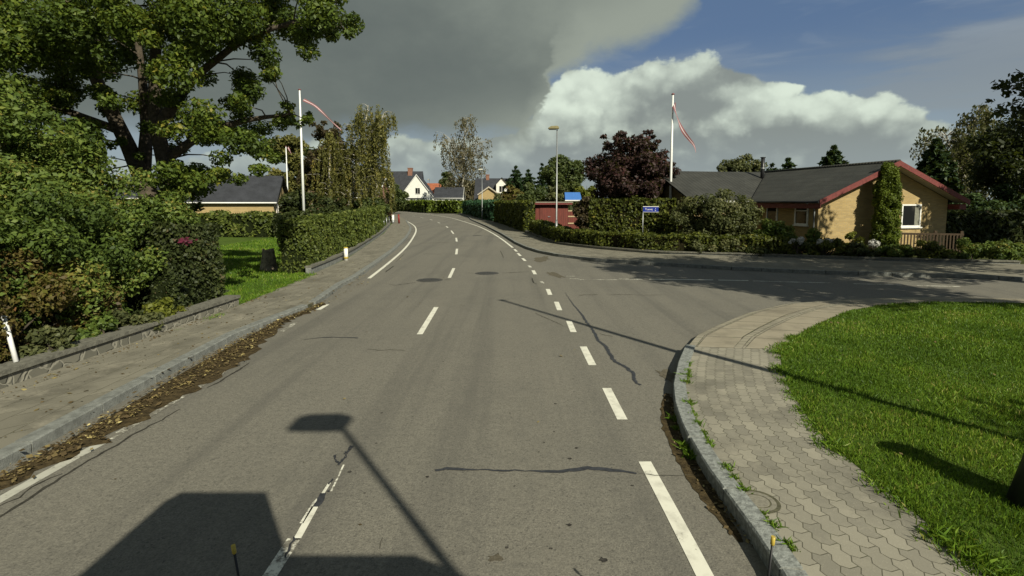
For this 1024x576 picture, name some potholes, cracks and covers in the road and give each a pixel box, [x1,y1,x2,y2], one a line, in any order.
utility cover [746,490,781,513]
